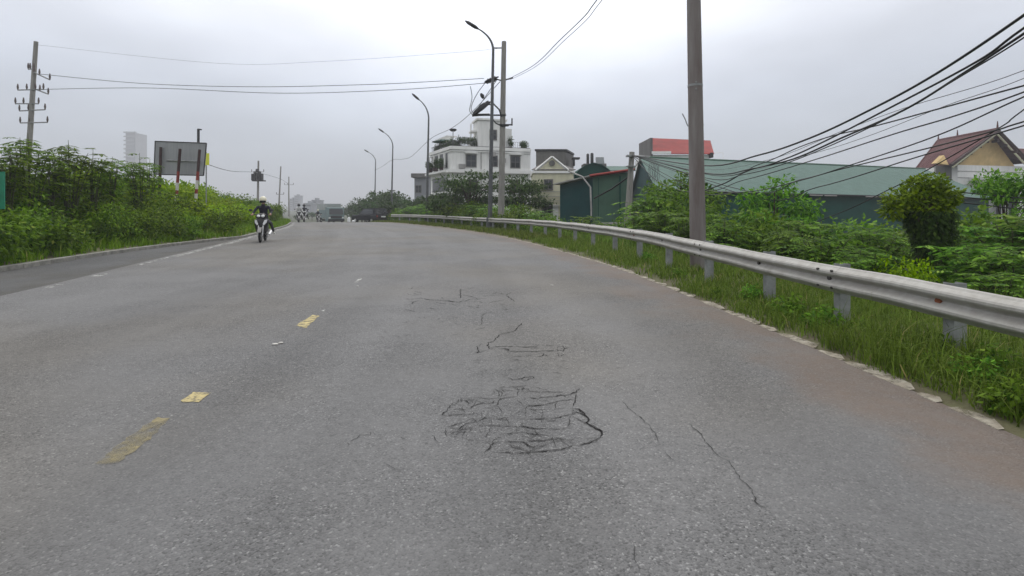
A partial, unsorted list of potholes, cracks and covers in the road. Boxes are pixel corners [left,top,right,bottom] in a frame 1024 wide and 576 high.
crack [389,287,681,478]
crack [325,403,440,469]
